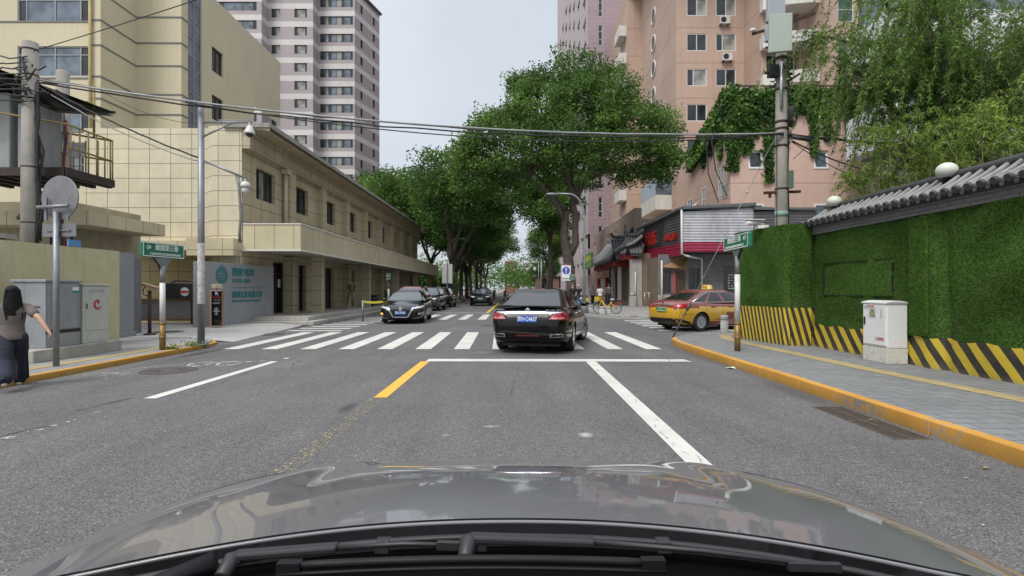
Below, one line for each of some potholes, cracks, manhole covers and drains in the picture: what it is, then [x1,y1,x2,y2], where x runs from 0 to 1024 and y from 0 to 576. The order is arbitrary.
drain grate [811,406,934,440]
manhole cover [137,367,198,375]
